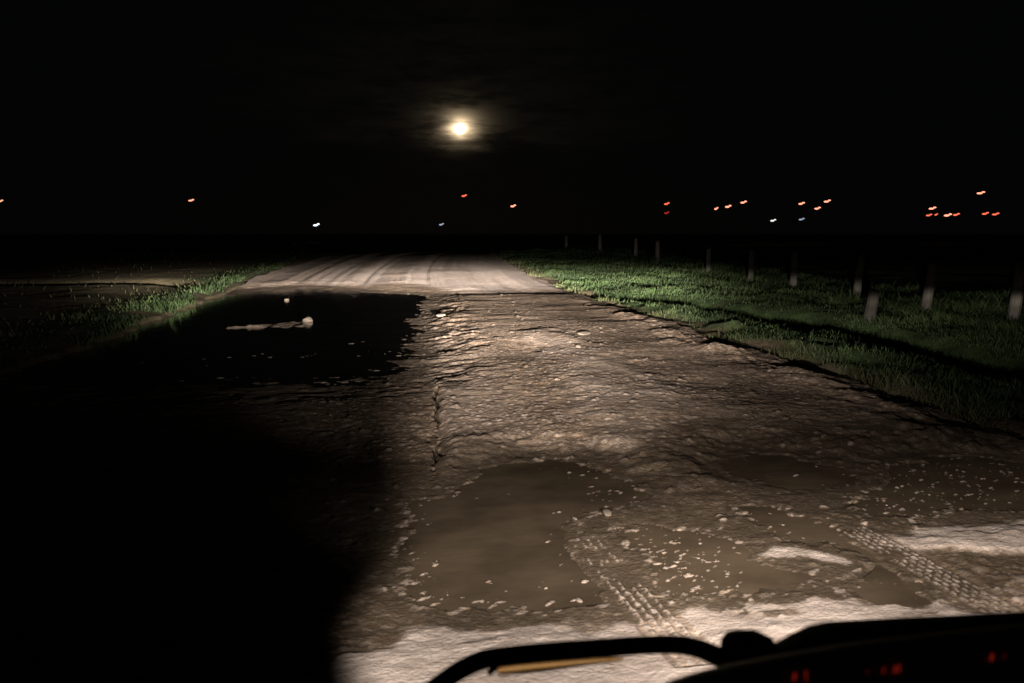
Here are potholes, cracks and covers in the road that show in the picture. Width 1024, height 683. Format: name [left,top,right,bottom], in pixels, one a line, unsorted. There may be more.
pothole [731,500,937,610]
pothole [39,286,436,391]
pothole [376,454,656,620]
crack [422,384,450,483]
pothole [711,450,882,494]
